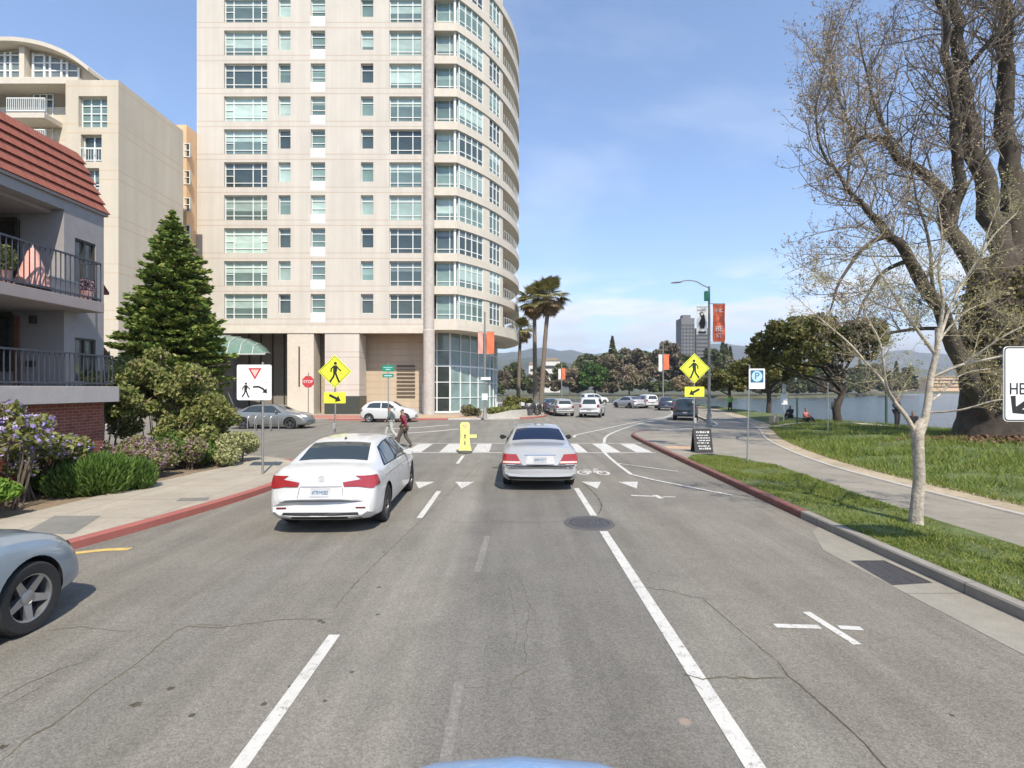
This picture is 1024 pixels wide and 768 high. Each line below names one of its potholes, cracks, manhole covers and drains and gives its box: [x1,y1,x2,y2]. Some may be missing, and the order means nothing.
crack [2,619,292,760]
crack [467,578,536,689]
drain grate [851,560,932,585]
manhole cover [564,516,615,531]
crack [682,673,784,689]
